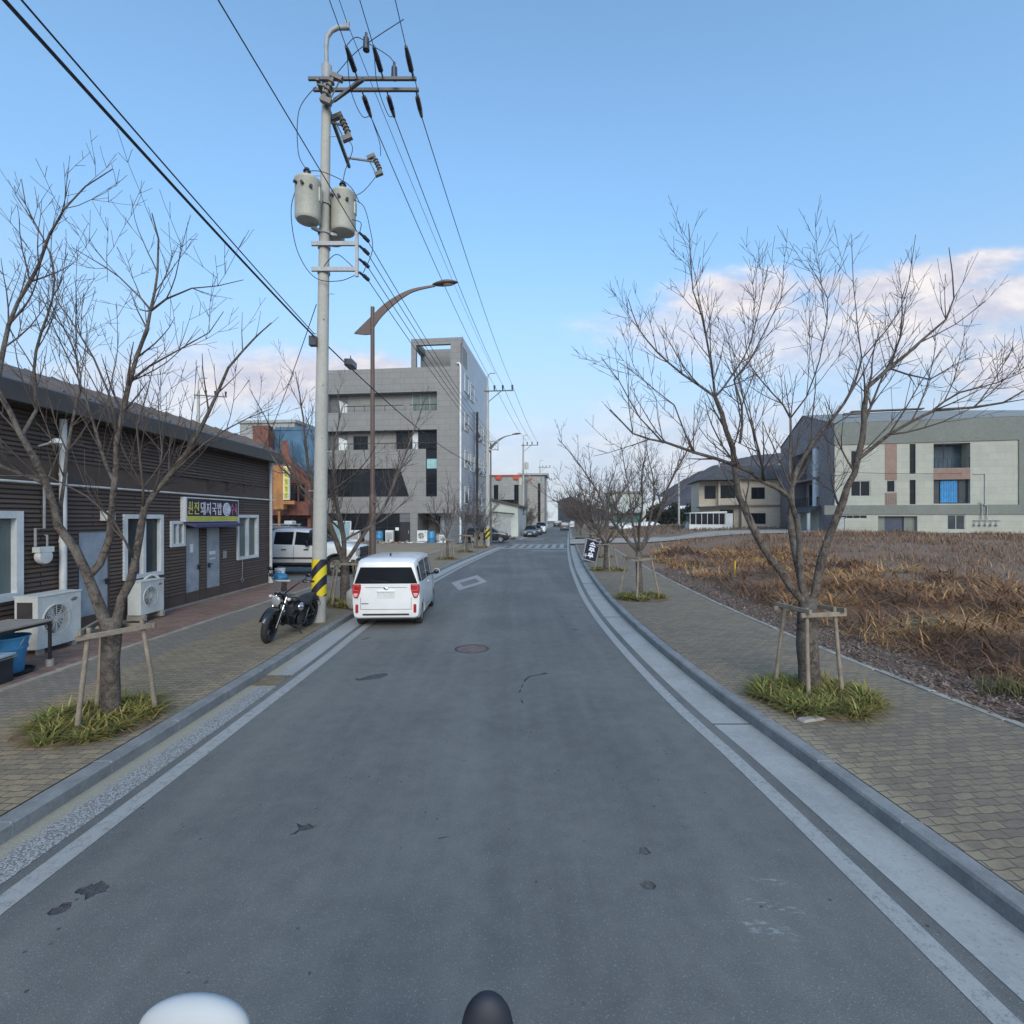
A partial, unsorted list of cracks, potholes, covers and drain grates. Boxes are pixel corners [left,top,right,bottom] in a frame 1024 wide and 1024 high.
manhole cover [454,644,489,653]
pothole [640,880,656,890]
